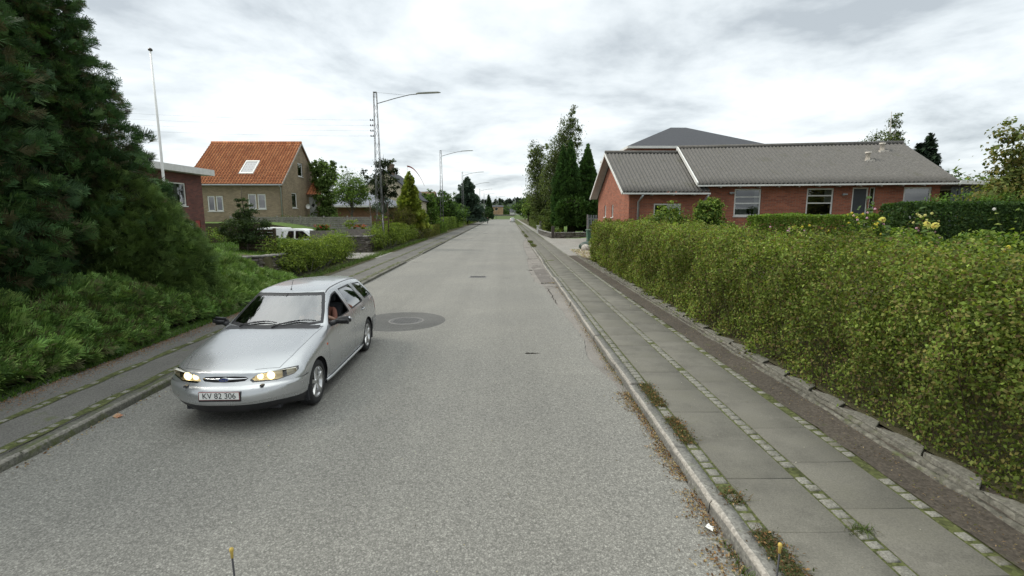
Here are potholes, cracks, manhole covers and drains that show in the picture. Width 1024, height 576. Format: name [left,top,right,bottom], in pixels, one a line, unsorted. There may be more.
manhole cover [388,317,424,325]
